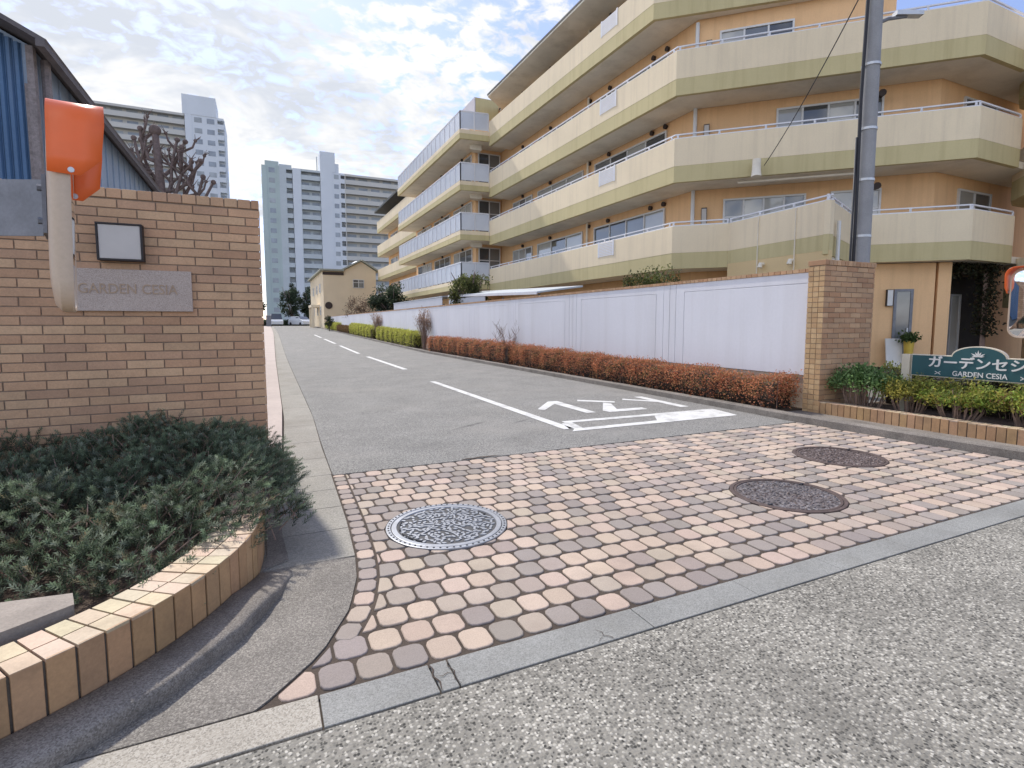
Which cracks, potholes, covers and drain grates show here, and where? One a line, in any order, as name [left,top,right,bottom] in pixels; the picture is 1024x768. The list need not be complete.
crack [428,659,462,689]
manhole cover [386,503,507,551]
manhole cover [730,479,849,514]
manhole cover [793,446,889,468]
